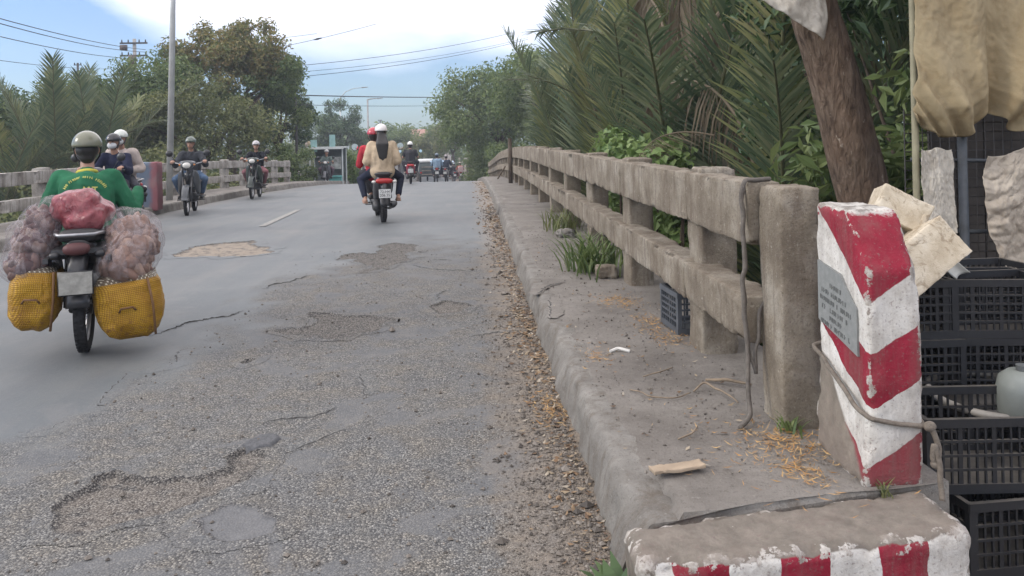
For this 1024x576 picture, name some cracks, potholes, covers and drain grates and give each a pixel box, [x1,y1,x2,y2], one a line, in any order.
crack [529,282,566,318]
crack [16,310,243,438]
crack [258,407,349,452]
